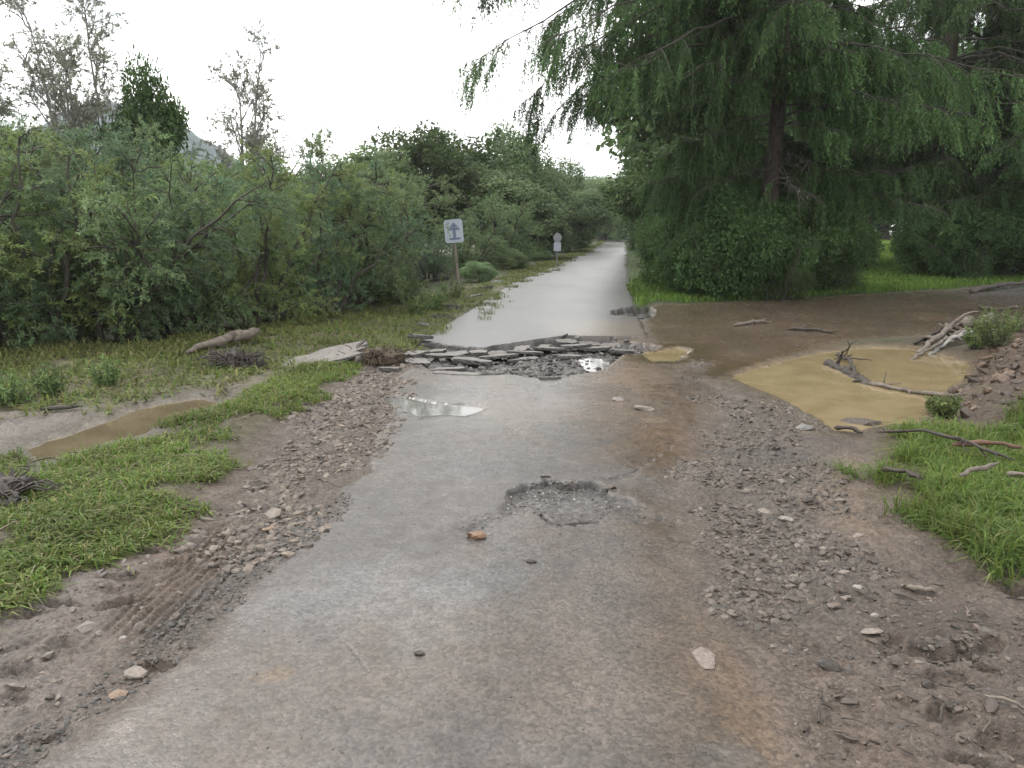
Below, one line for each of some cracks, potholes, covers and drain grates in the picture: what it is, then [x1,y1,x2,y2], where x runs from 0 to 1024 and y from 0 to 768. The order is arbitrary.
pothole [448,478,658,541]
pothole [419,336,662,377]
